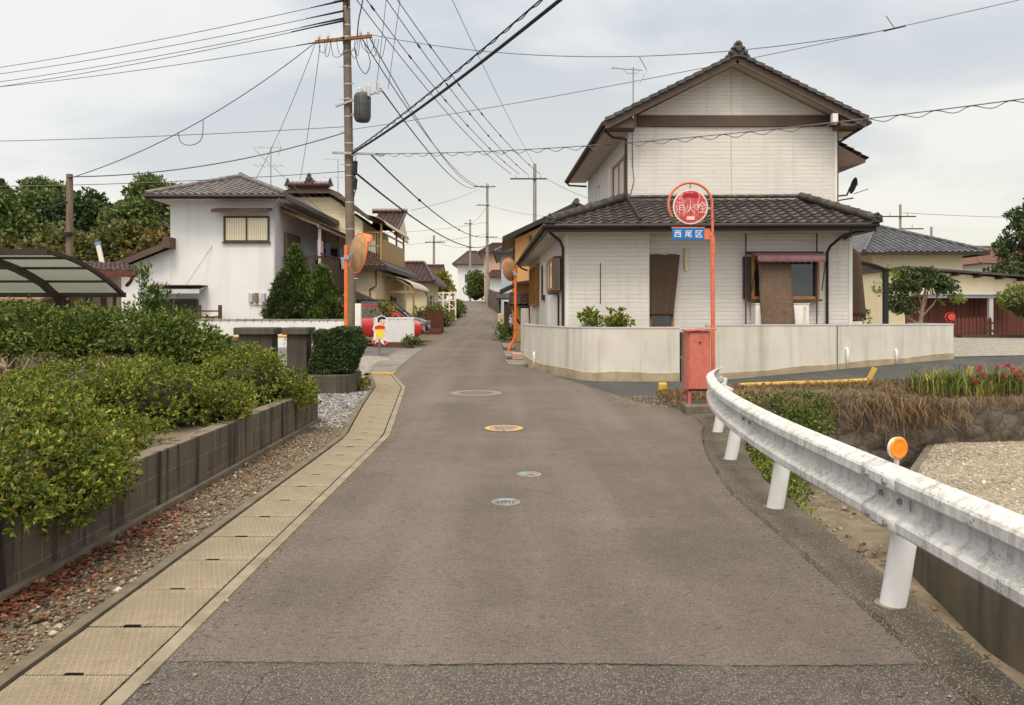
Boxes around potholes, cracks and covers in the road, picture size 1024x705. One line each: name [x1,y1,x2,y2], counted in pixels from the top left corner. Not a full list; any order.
manhole cover [491,498,520,506]
